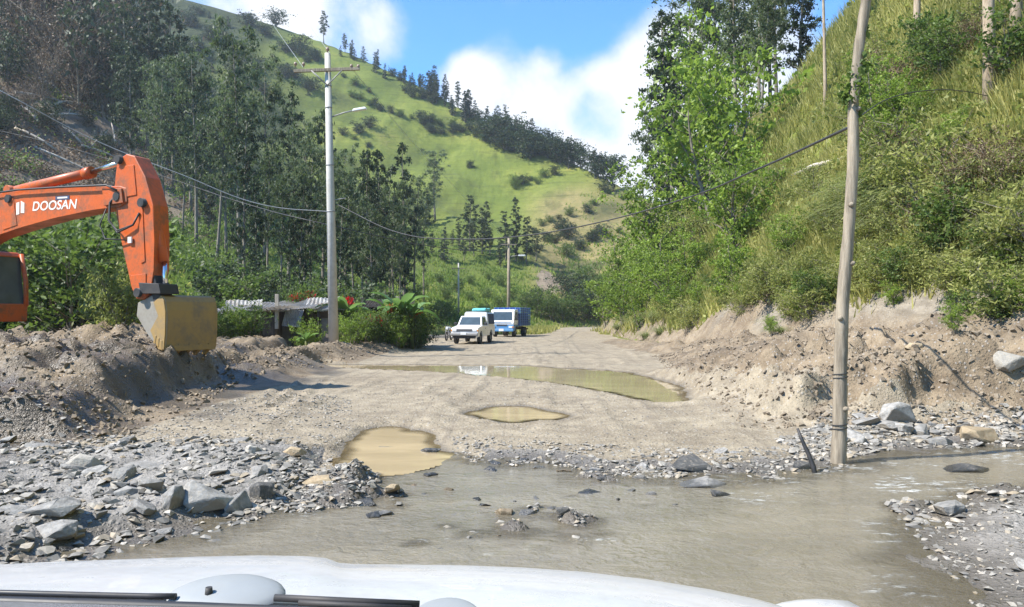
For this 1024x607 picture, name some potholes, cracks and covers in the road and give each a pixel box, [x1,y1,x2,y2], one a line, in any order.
pothole [305,355,707,402]
pothole [450,402,584,425]
pothole [319,420,488,479]
